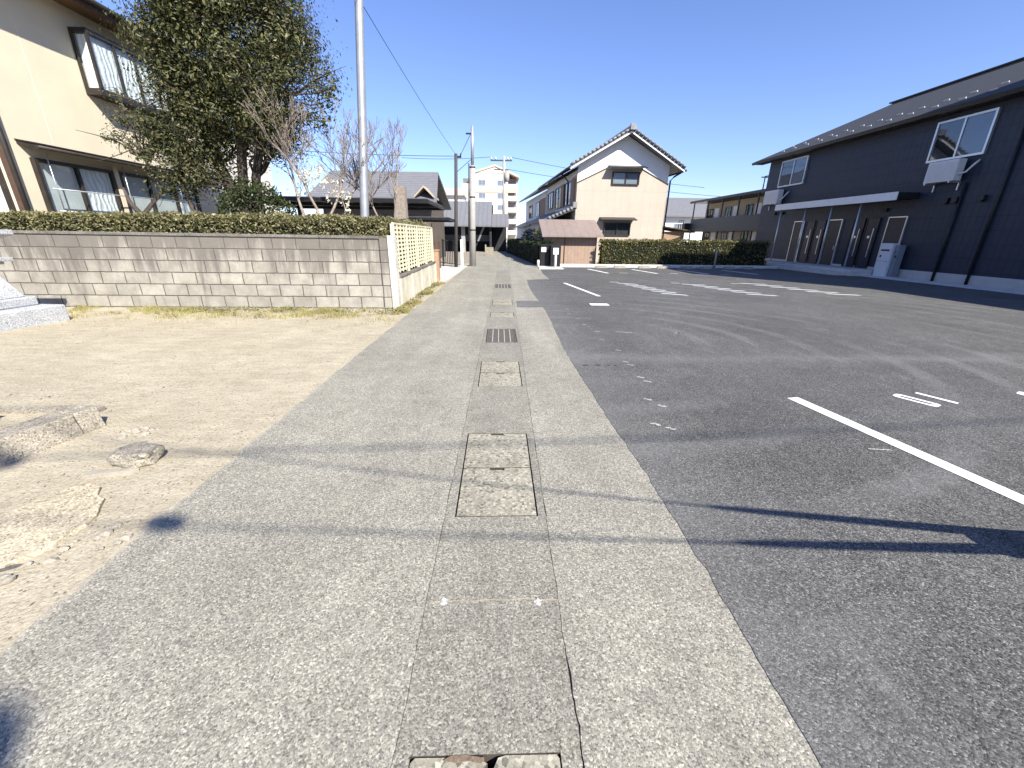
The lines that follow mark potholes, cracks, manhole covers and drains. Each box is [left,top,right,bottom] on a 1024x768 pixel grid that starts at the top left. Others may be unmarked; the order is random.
drain grate [486,329,517,343]
